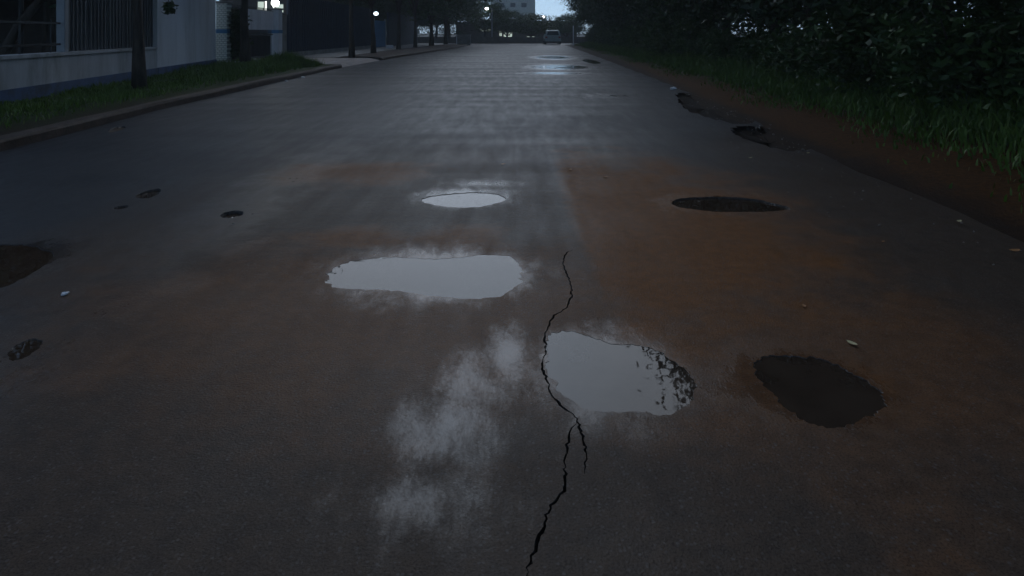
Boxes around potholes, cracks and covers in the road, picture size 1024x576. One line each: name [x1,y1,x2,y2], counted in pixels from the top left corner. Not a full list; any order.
pothole [0,244,54,288]
pothole [136,188,161,199]
pothole [730,126,790,151]
pothole [545,331,697,416]
pothole [672,197,790,212]
pothole [325,255,523,299]
crack [526,251,587,576]
pothole [676,93,744,124]
pothole [421,192,506,208]
pothole [753,355,888,428]
pothole [7,338,43,361]
